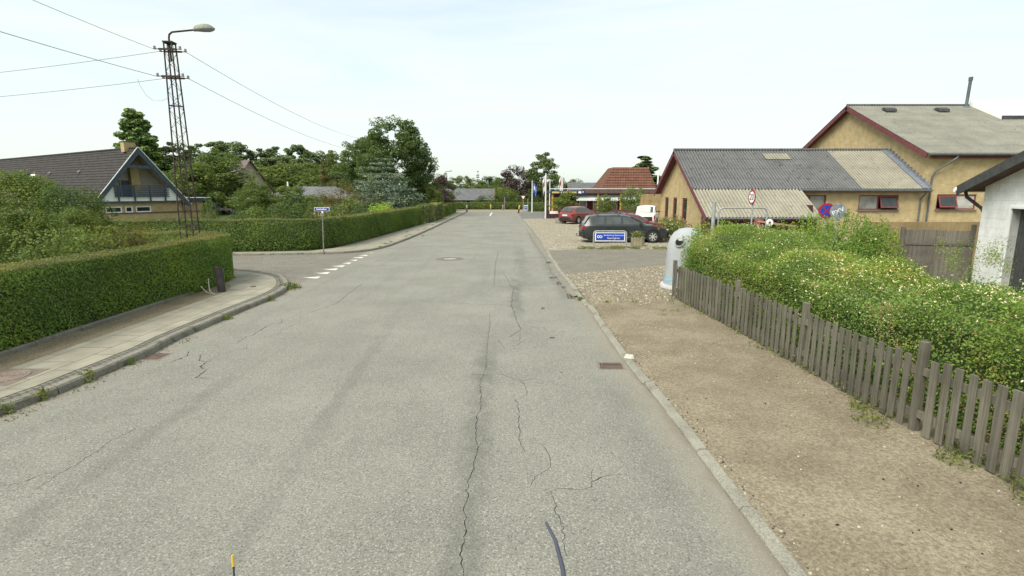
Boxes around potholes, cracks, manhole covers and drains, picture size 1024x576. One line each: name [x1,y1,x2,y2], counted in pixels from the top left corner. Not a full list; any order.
crack [531,447,620,556]
crack [428,254,568,576]
drain grate [595,362,627,370]
crack [2,426,139,488]
